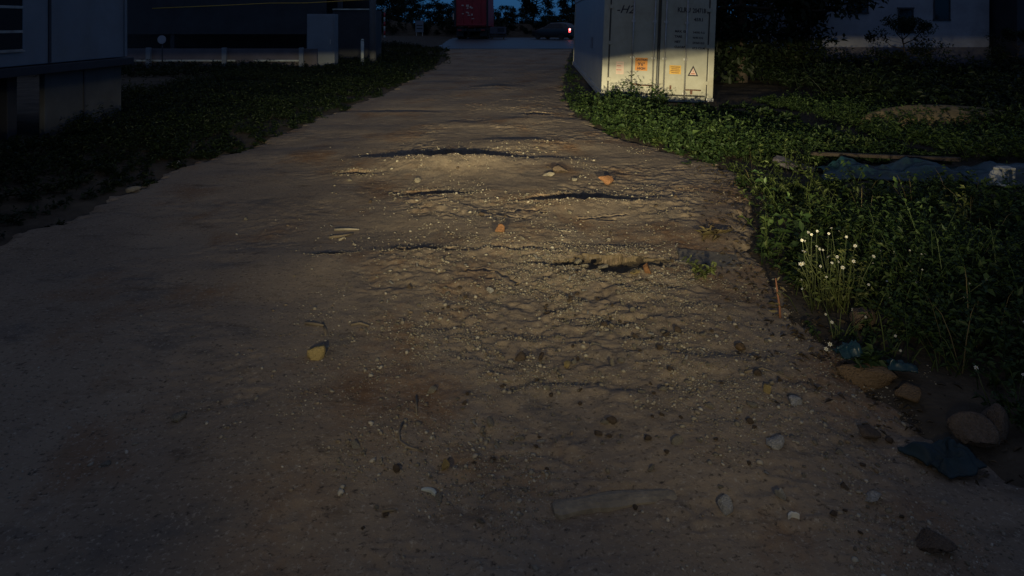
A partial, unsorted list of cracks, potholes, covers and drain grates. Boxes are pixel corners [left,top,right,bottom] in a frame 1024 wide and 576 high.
pothole [549,253,673,274]
